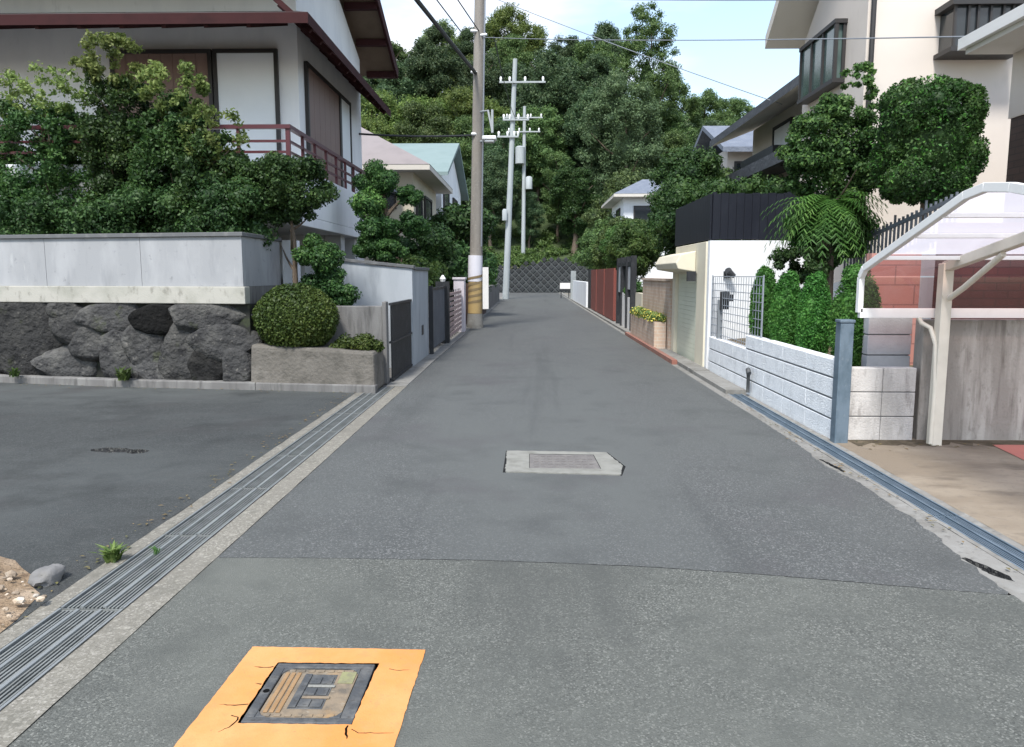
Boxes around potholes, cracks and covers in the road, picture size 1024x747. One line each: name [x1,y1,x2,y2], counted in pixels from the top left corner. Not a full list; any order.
crack [219,666,274,732]
drain grate [780,424,833,447]
drain grate [933,515,1024,570]
manhole cover [503,451,626,476]
drain grate [729,394,764,408]
manhole cover [241,663,375,730]
drain grate [751,407,795,425]
drain grate [863,474,957,517]
pothole [962,557,1015,582]
drain grate [815,445,884,476]
